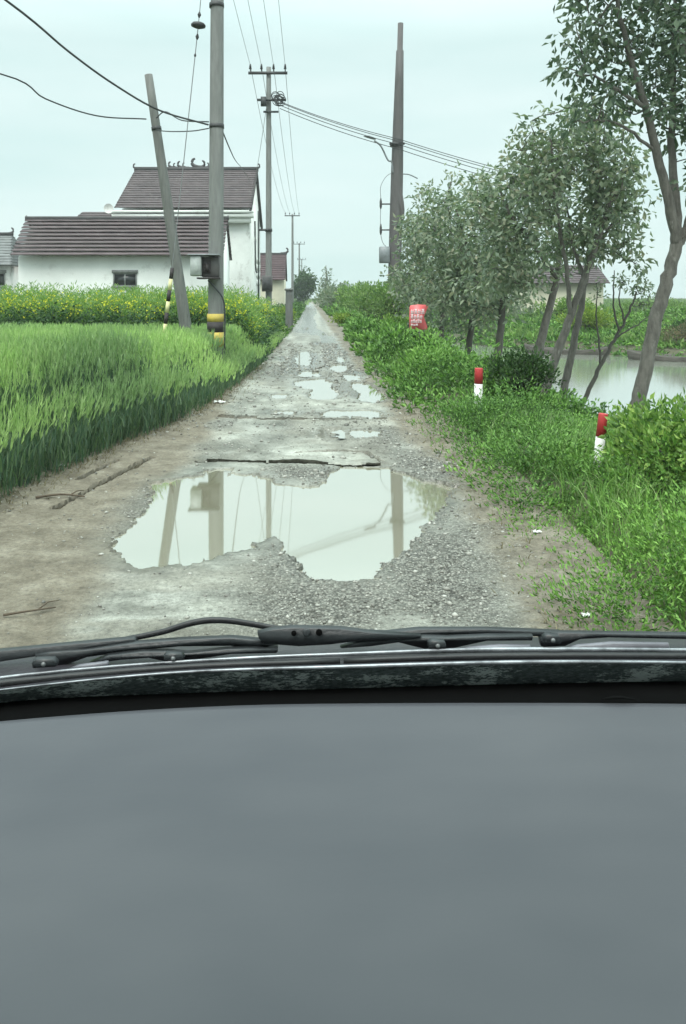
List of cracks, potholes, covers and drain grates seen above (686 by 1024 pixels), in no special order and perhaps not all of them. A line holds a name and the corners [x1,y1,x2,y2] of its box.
pothole [291,377,343,400]
pothole [332,428,387,439]
pothole [292,350,315,366]
pothole [99,465,467,582]
pothole [317,408,389,419]
pothole [331,380,393,403]
